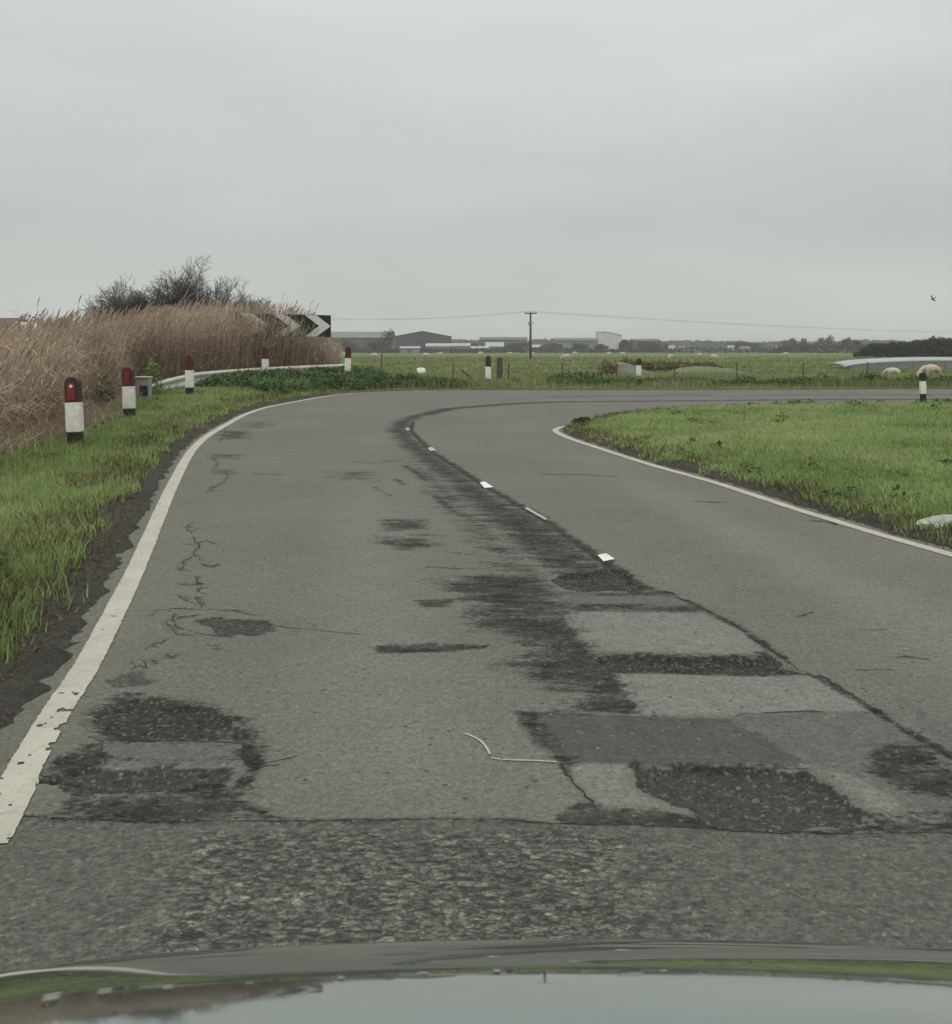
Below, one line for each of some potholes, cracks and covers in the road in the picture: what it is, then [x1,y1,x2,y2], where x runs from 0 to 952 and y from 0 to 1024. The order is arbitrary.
crack [131,428,255,669]
